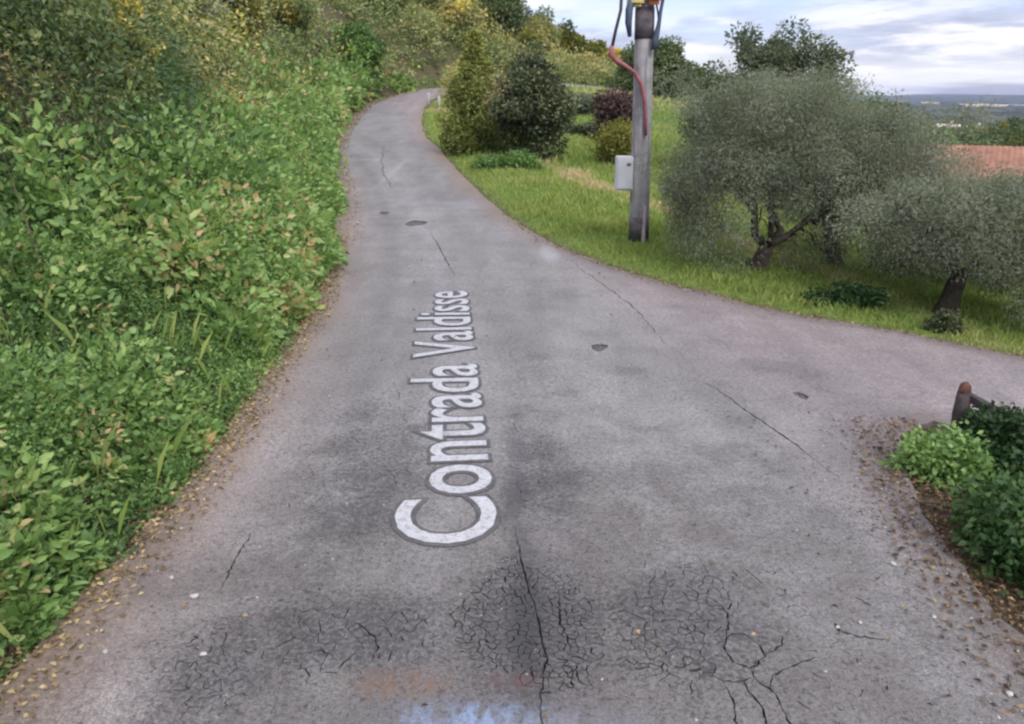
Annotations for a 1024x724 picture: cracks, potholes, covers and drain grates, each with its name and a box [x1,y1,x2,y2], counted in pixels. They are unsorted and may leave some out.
crack [571,260,664,343]
crack [605,559,863,724]
crack [706,383,839,477]
crack [834,623,884,640]
crack [161,583,439,720]
crack [217,527,256,595]
crack [449,557,606,696]
